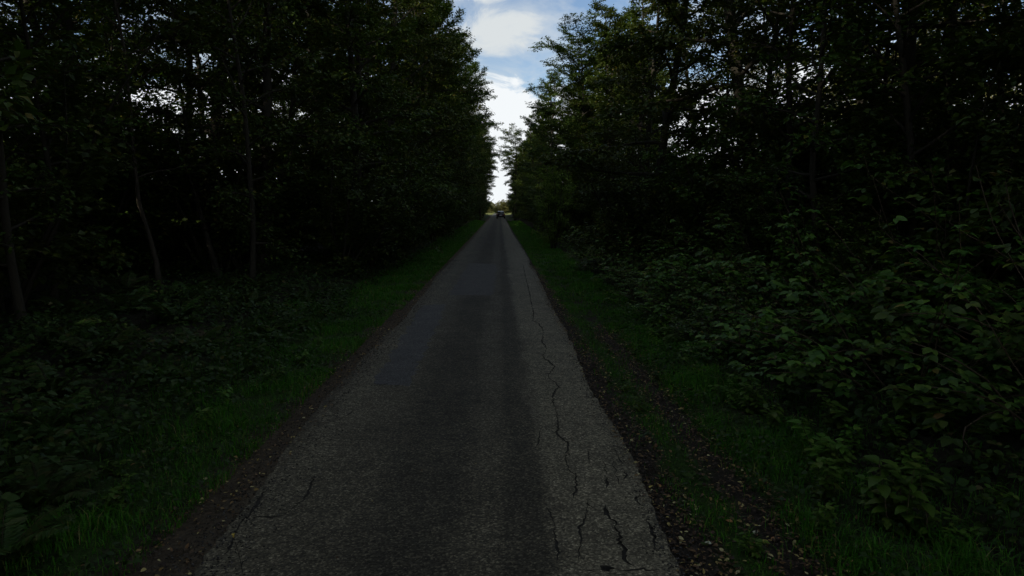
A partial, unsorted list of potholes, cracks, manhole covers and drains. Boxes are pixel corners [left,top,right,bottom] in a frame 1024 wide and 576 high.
crack [224,476,314,568]
crack [522,264,663,571]
